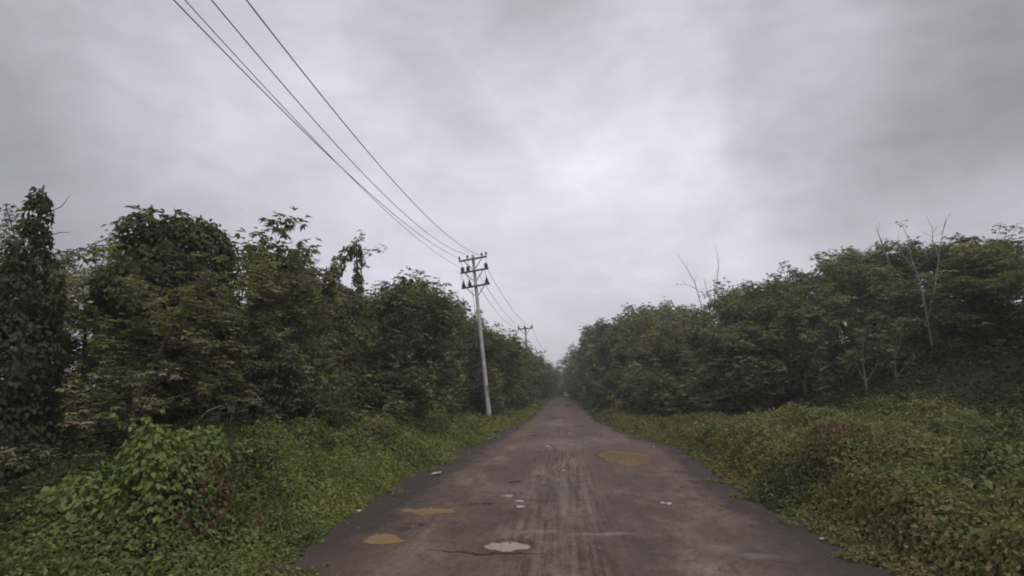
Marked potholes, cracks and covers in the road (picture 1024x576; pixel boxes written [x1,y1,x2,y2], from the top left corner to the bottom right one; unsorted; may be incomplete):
pothole [363,533,406,544]
pothole [483,540,532,552]
pothole [399,507,458,515]
pothole [598,451,652,466]
